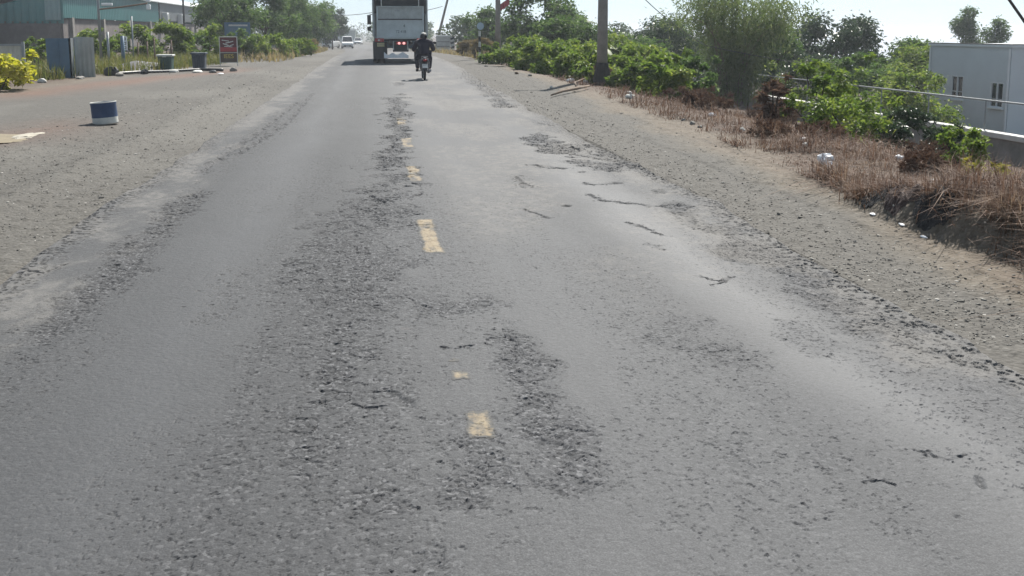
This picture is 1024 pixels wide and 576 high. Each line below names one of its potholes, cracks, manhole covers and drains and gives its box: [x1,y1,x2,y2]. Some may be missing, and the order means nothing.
crack [14,69,992,525]
pothole [532,433,581,471]
